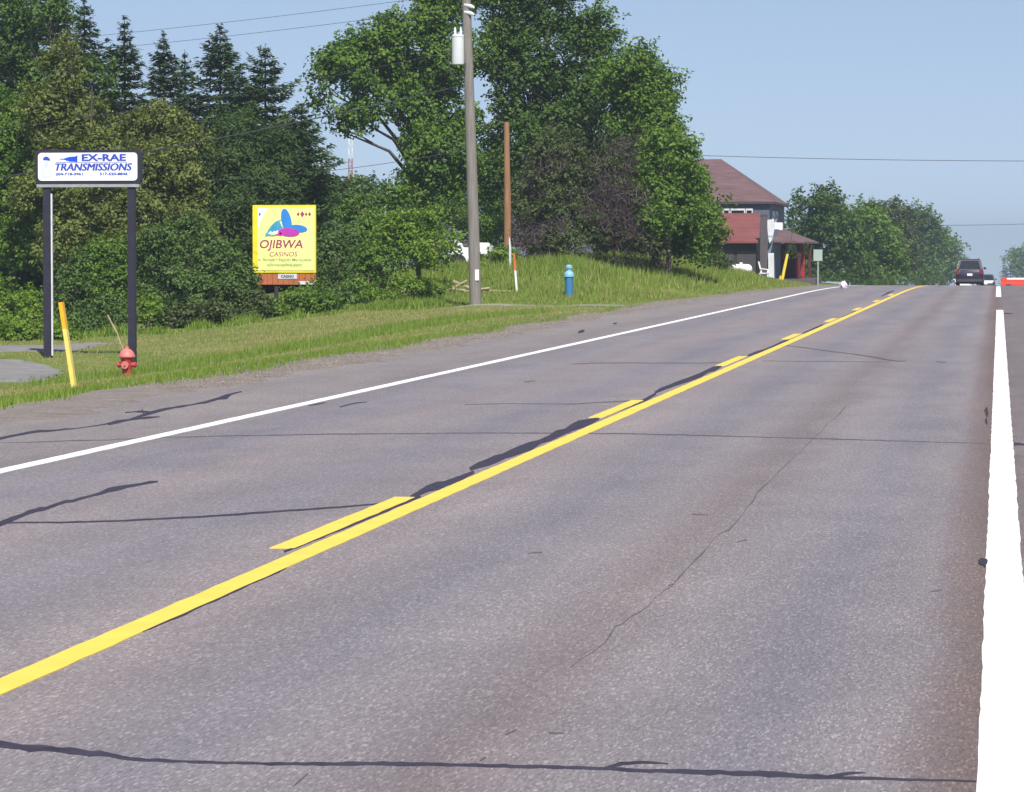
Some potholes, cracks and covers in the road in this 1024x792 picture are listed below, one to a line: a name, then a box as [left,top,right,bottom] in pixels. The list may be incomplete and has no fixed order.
crack [0,391,986,668]
